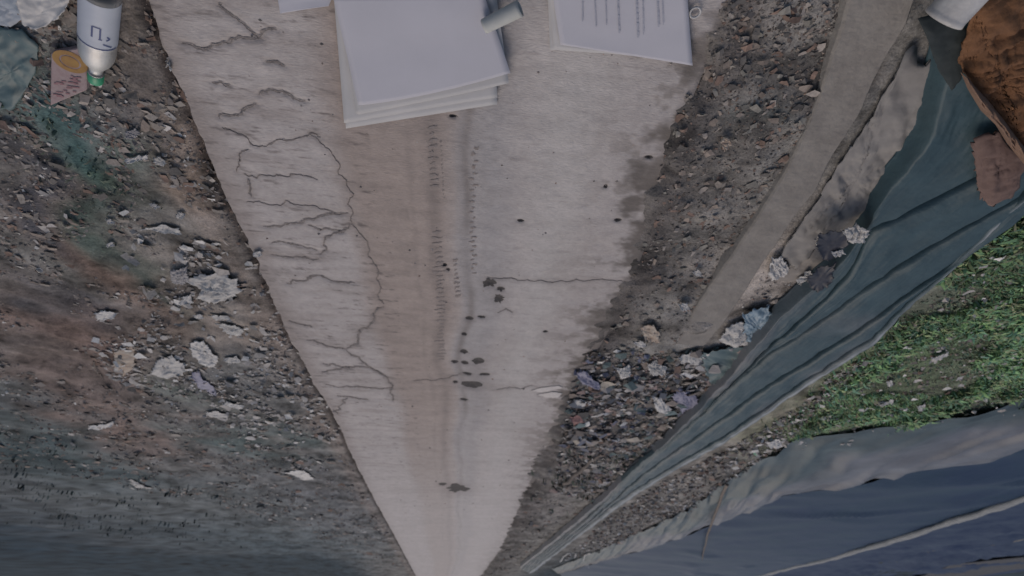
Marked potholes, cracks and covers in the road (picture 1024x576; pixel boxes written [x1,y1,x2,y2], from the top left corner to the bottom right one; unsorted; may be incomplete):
crack [218,89,394,414]
crack [183,4,277,51]
